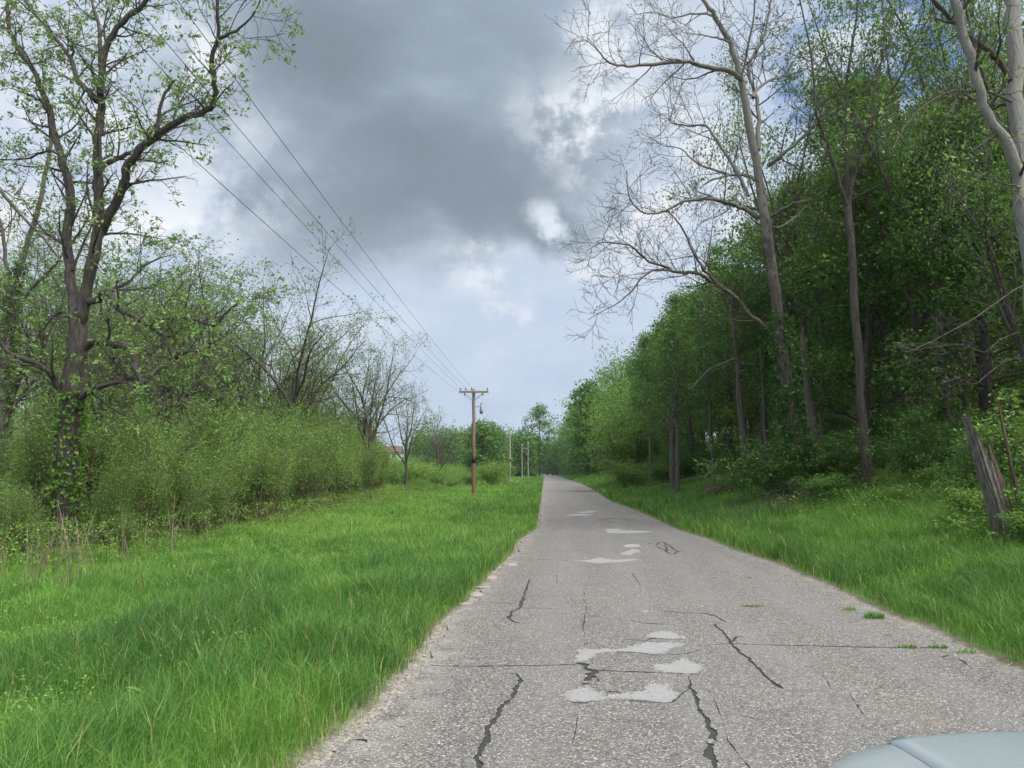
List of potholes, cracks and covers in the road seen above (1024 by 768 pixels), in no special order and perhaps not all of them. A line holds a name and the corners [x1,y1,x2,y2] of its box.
crack [473,674,524,768]
crack [506,579,530,623]
crack [568,611,783,768]
